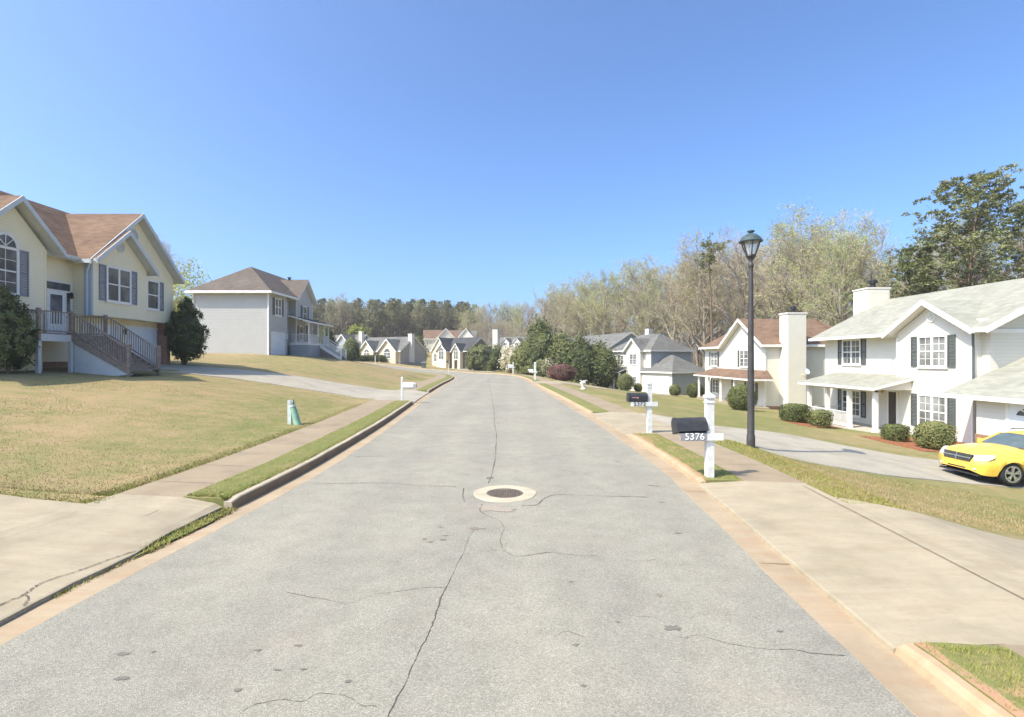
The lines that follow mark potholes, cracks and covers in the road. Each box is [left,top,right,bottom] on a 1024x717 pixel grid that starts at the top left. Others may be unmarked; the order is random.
manhole cover [474,485,537,502]
crack [243,488,595,716]
